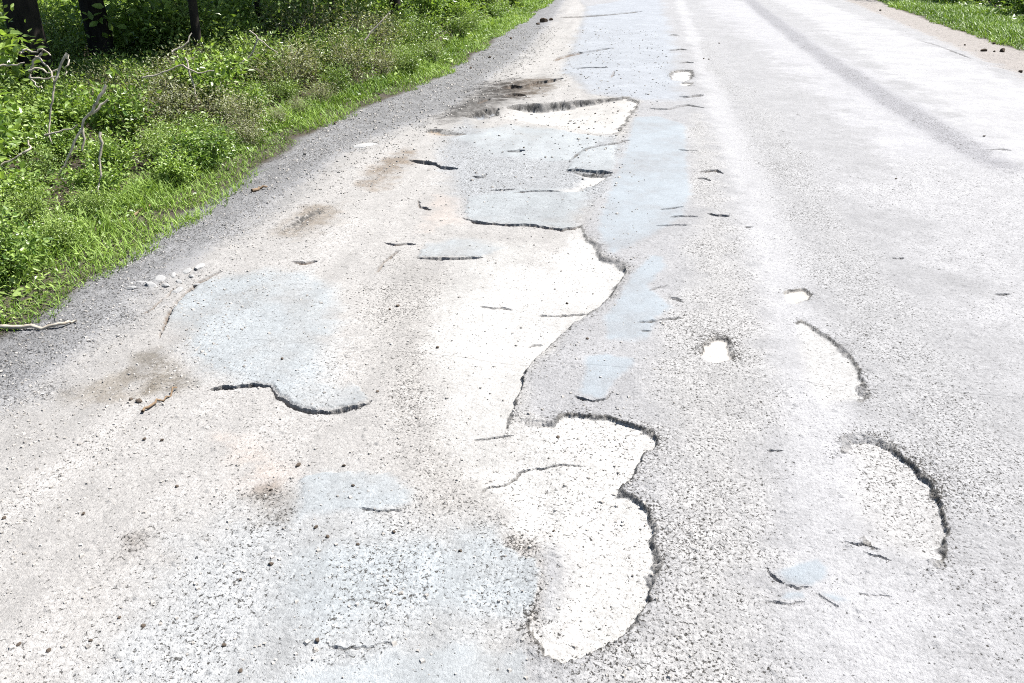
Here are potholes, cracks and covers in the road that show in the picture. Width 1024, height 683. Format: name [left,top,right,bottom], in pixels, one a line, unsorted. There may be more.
pothole [781,288,815,305]
crack [843,541,892,561]
crack [461,217,582,232]
pothole [467,412,664,665]
crack [655,206,752,228]
pothole [498,96,640,135]
crack [374,242,483,274]
pothole [832,432,951,570]
pothole [785,319,871,415]
pothole [698,334,737,365]
crack [410,140,630,193]
crack [636,285,685,332]
